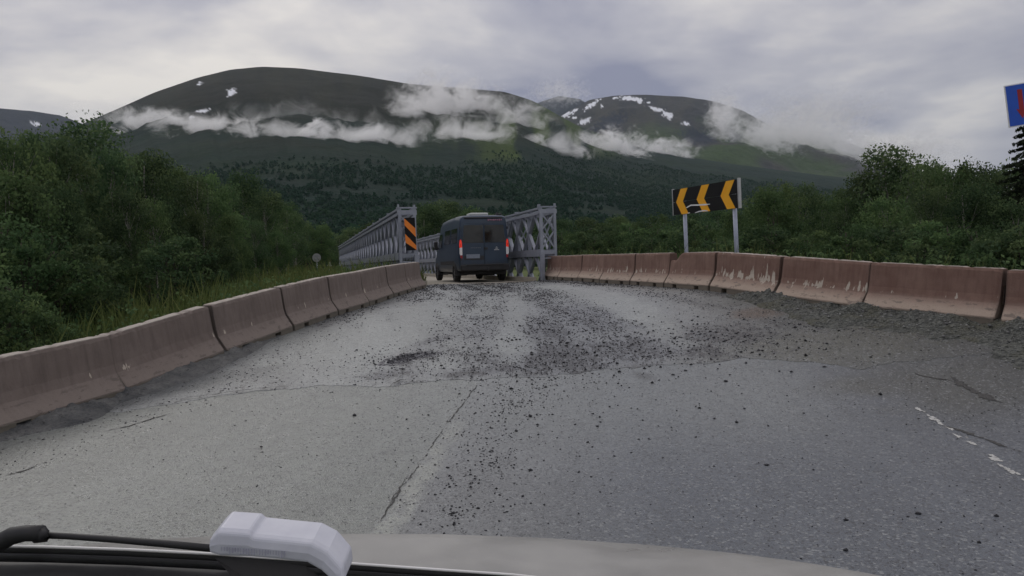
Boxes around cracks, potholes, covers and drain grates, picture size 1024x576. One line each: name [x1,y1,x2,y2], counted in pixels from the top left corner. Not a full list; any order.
crack [946,426,1021,452]
crack [915,373,1003,403]
crack [112,386,275,430]
pothole [376,351,442,366]
